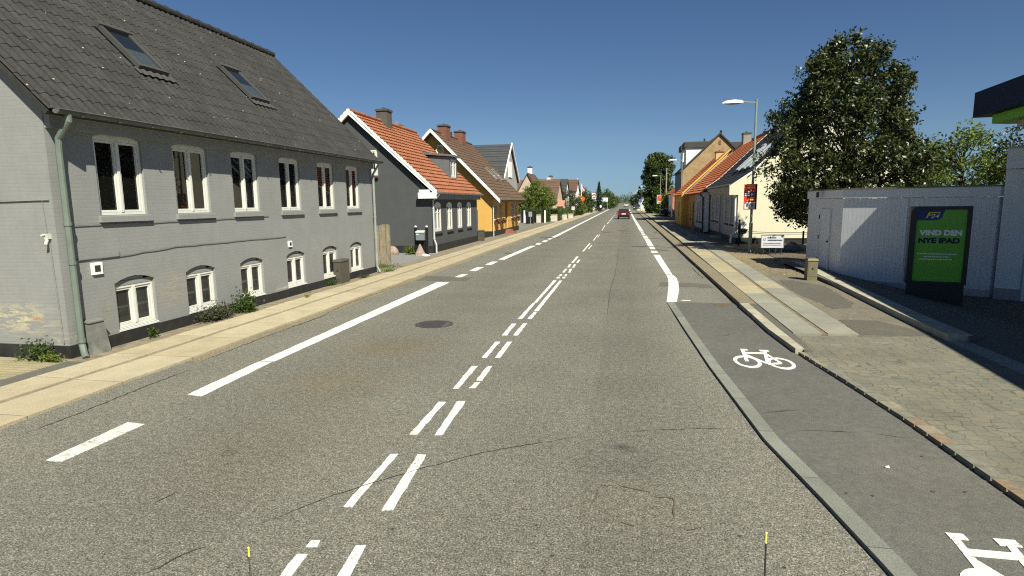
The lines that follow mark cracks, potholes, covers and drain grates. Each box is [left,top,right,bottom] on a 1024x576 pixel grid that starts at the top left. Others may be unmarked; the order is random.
crack [264,437,573,522]
crack [590,485,700,530]
crack [28,371,185,432]
manhole cover [415,320,453,328]
